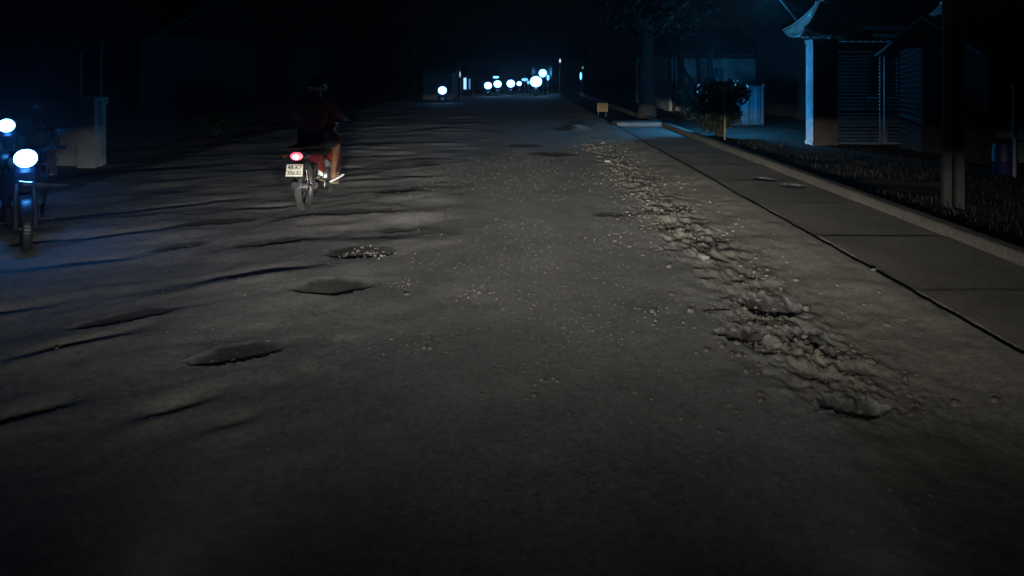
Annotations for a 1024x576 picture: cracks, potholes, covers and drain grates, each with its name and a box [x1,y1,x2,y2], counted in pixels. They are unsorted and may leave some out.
pothole [180,338,290,367]
pothole [777,325,833,348]
pothole [281,275,378,296]
pothole [709,322,768,349]
pothole [319,243,399,259]
pothole [809,391,902,421]
pothole [729,291,808,319]
